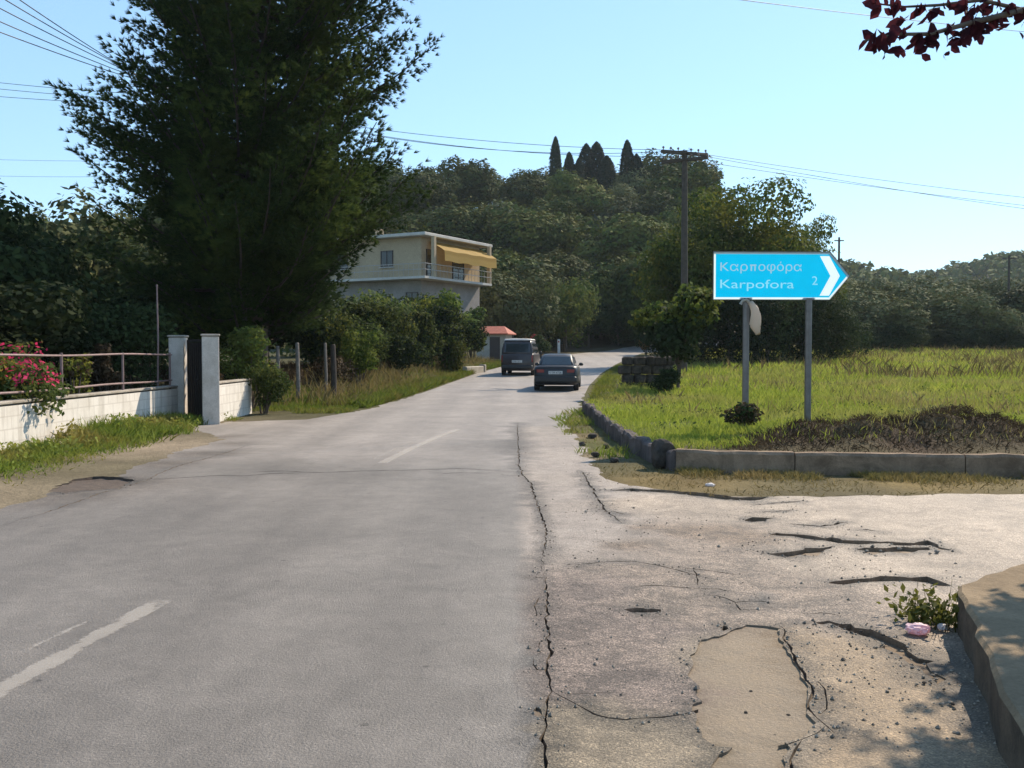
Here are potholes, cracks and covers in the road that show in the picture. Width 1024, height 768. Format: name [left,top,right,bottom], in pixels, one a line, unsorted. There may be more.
crack [517,425,697,768]
crack [779,613,839,768]
crack [586,561,765,610]
